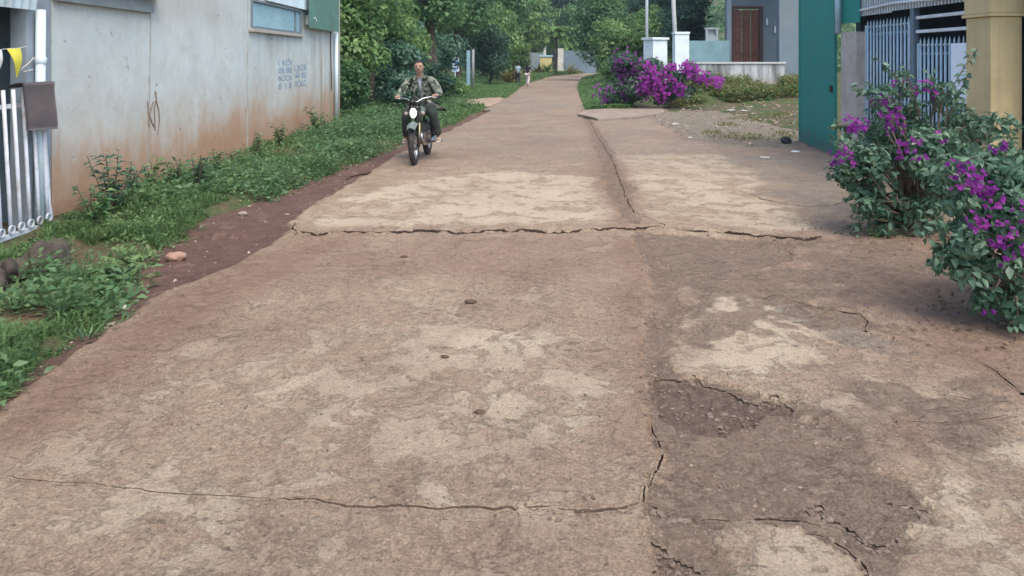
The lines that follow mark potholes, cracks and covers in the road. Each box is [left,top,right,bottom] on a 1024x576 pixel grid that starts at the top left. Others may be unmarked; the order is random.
crack [694,516,873,576]
crack [896,361,1024,426]
crack [0,414,668,523]
crack [763,294,930,345]
crack [750,194,849,207]
pothole [641,372,807,443]
crack [290,215,824,242]
